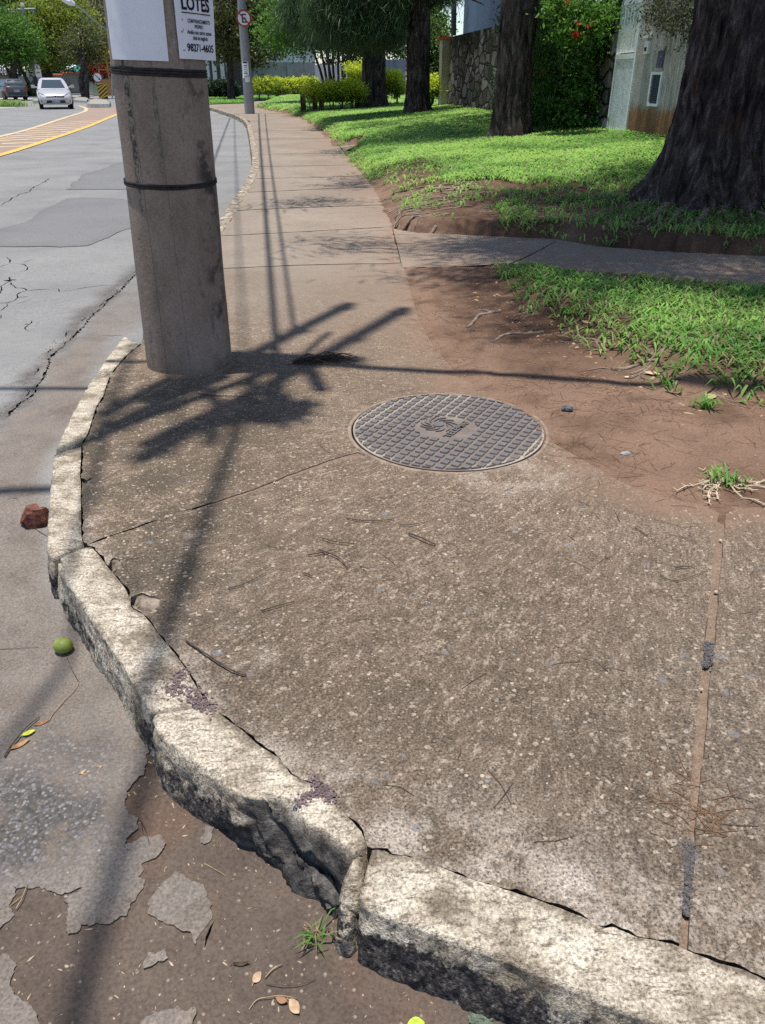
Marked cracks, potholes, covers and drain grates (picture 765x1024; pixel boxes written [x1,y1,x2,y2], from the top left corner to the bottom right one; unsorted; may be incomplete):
pothole [0,753,504,1024]
crack [81,405,765,980]
manhole cover [348,393,550,474]
crack [0,258,119,319]
